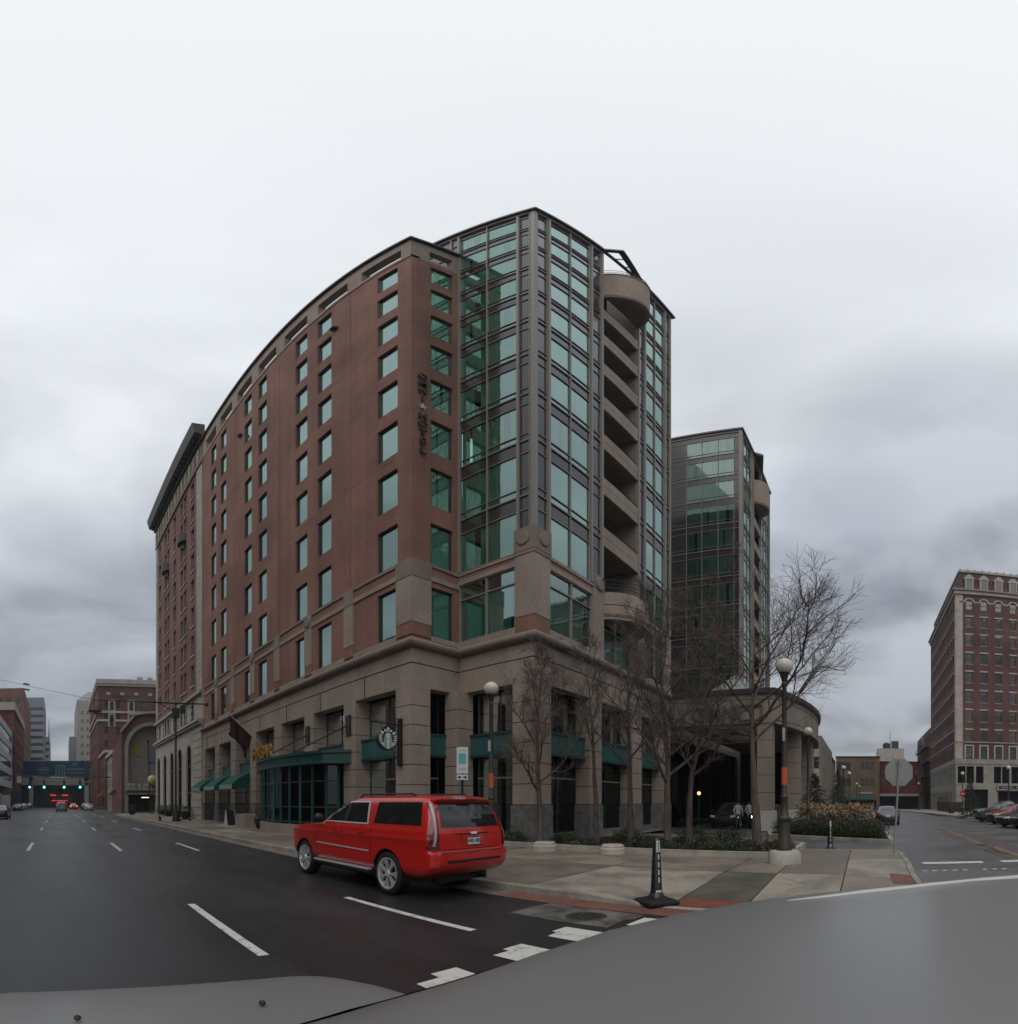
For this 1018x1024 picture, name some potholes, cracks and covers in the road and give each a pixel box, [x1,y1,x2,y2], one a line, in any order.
manhole cover [566,912,607,921]
